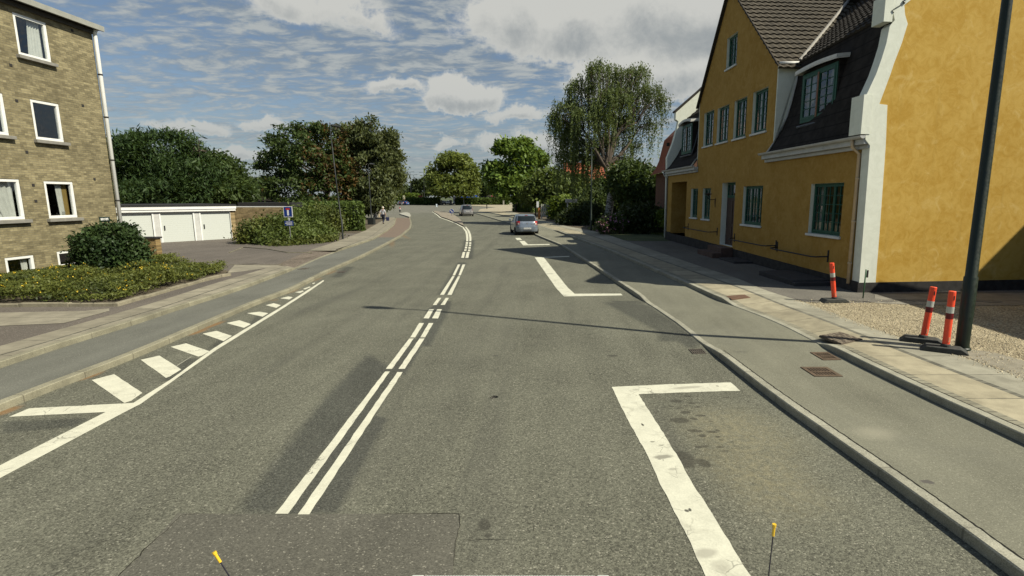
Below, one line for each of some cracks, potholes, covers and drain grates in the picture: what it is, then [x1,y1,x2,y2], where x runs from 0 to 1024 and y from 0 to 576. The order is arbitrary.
drain grate [810,352,842,360]
drain grate [800,367,843,377]
manhole cover [819,332,863,345]
